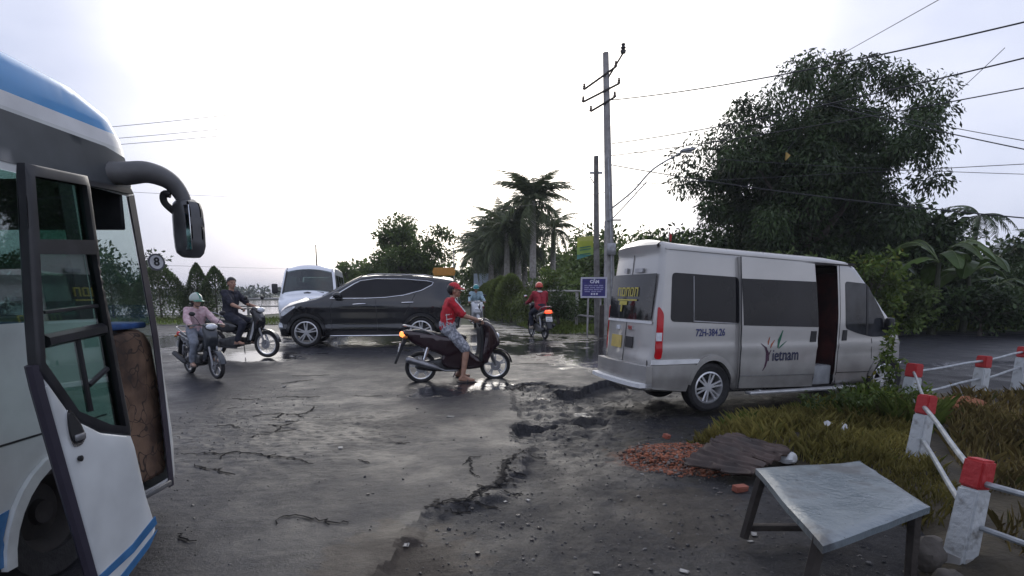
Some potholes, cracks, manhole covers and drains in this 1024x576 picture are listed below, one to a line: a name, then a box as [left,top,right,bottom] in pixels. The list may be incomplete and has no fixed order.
crack [424,448,545,513]
crack [275,514,348,525]
crack [181,375,320,474]
